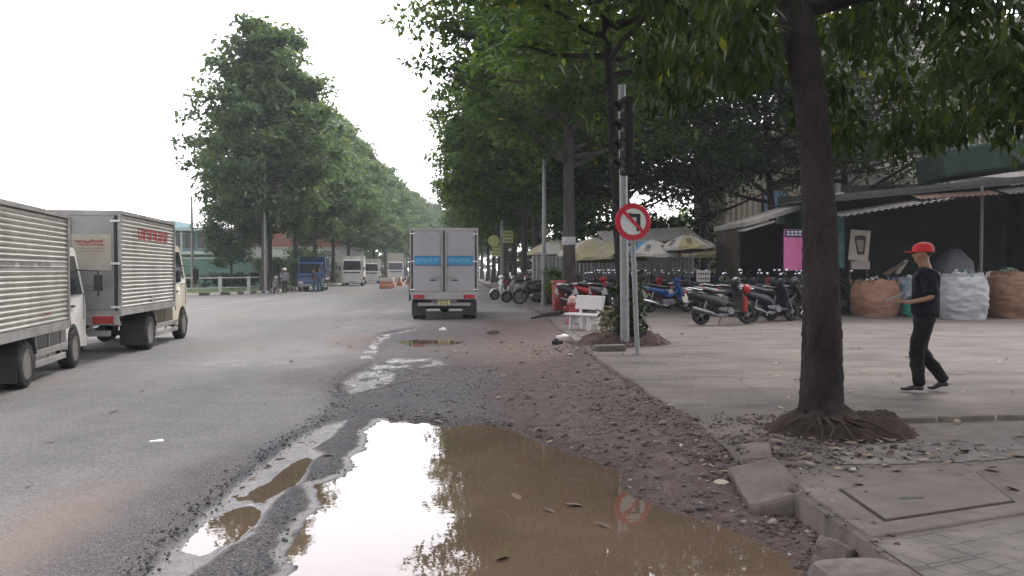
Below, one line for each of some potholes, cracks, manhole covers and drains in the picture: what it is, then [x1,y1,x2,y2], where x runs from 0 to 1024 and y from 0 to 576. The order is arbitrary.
pothole [270,418,812,576]
pothole [390,338,469,347]
manhole cover [799,461,1024,538]
